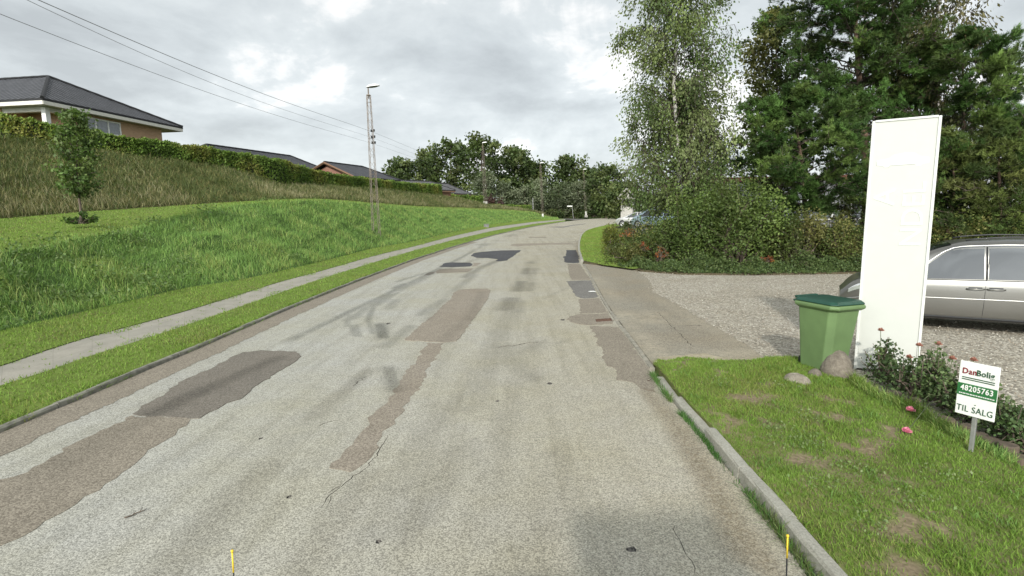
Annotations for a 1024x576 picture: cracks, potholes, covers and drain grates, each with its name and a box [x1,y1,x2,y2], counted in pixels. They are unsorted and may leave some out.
crack [321,436,388,507]
